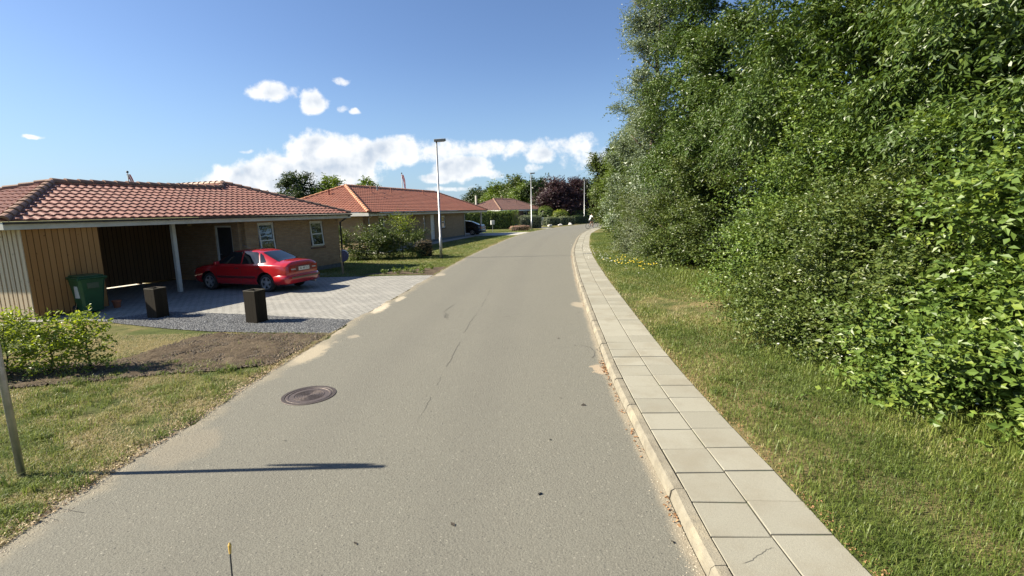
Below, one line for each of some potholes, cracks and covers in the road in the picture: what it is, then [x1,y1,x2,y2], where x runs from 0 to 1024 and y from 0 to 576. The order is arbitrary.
manhole cover [280,386,337,406]
